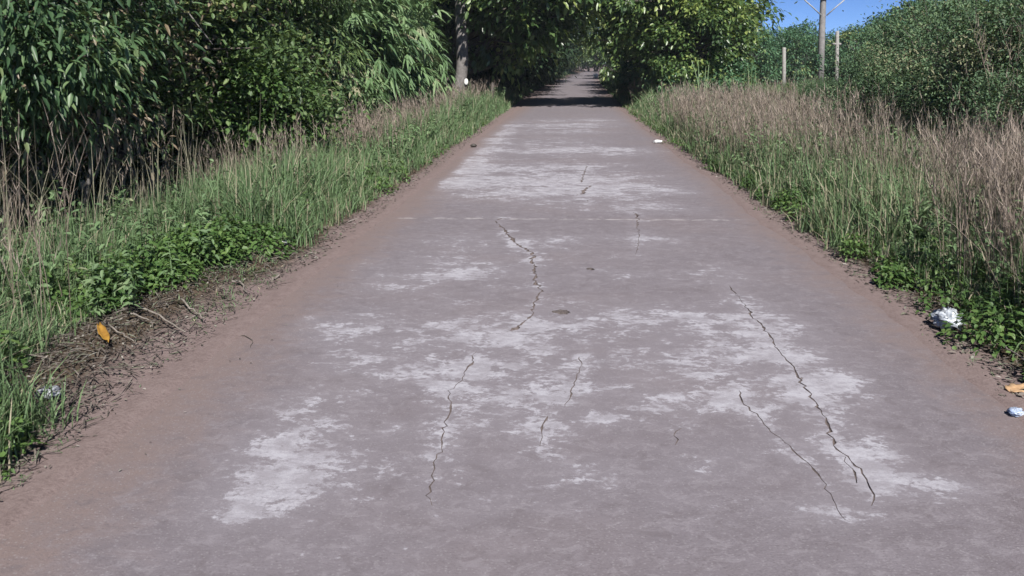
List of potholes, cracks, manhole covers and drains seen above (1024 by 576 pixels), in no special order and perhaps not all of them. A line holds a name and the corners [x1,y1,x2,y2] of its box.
crack [540,358,582,444]
crack [730,287,875,516]
crack [427,351,477,505]
crack [495,218,543,332]
